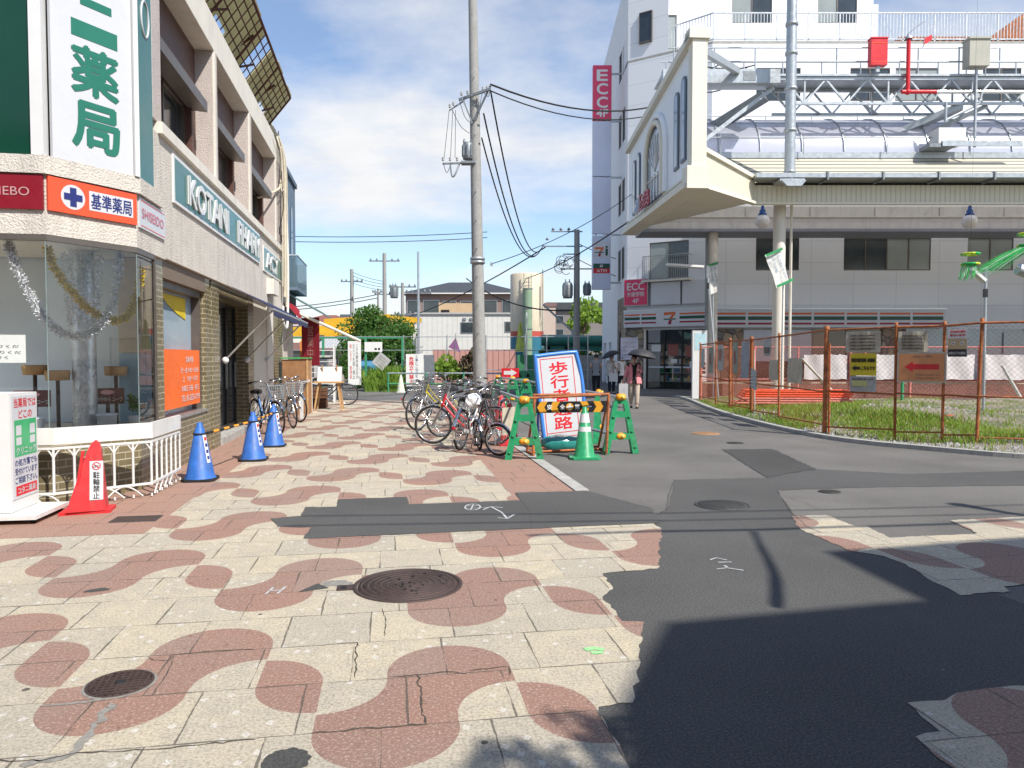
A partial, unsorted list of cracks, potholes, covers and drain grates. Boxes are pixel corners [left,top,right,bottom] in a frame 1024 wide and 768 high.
manhole cover [694,499,751,511]
crack [327,642,358,676]
manhole cover [336,568,463,603]
crack [0,699,252,767]
manhole cover [81,669,158,699]
